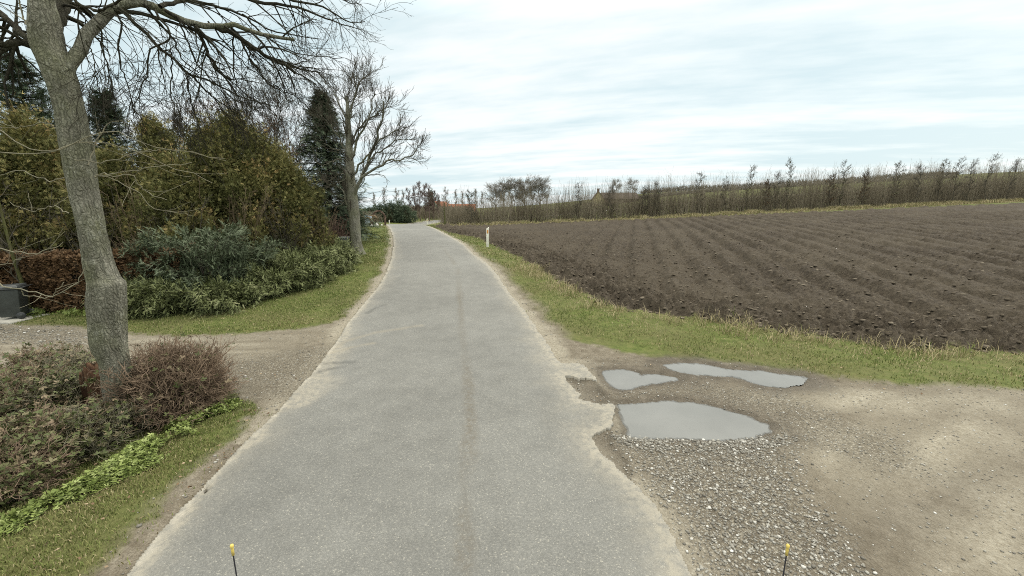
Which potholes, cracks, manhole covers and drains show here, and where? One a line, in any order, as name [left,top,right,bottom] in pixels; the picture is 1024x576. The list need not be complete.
pothole [597,368,685,392]
pothole [659,361,808,388]
pothole [612,396,778,444]
